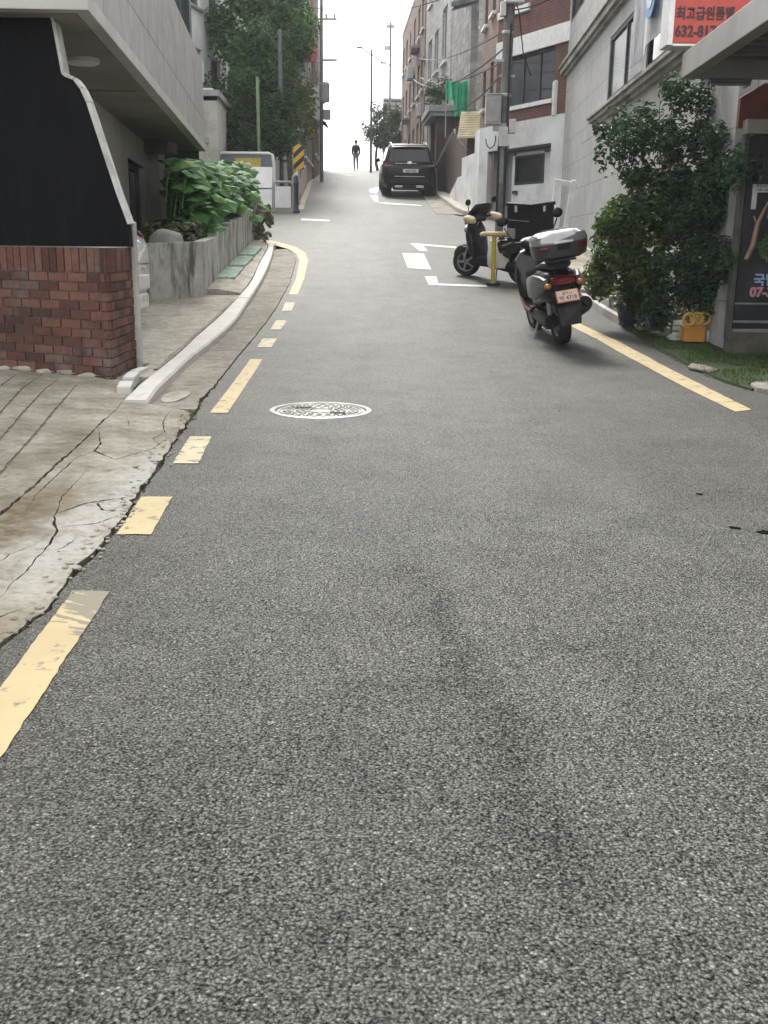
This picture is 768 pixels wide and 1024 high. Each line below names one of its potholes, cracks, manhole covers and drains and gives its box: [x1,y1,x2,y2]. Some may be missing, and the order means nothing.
crack [0,262,296,648]
manhole cover [269,402,372,419]
